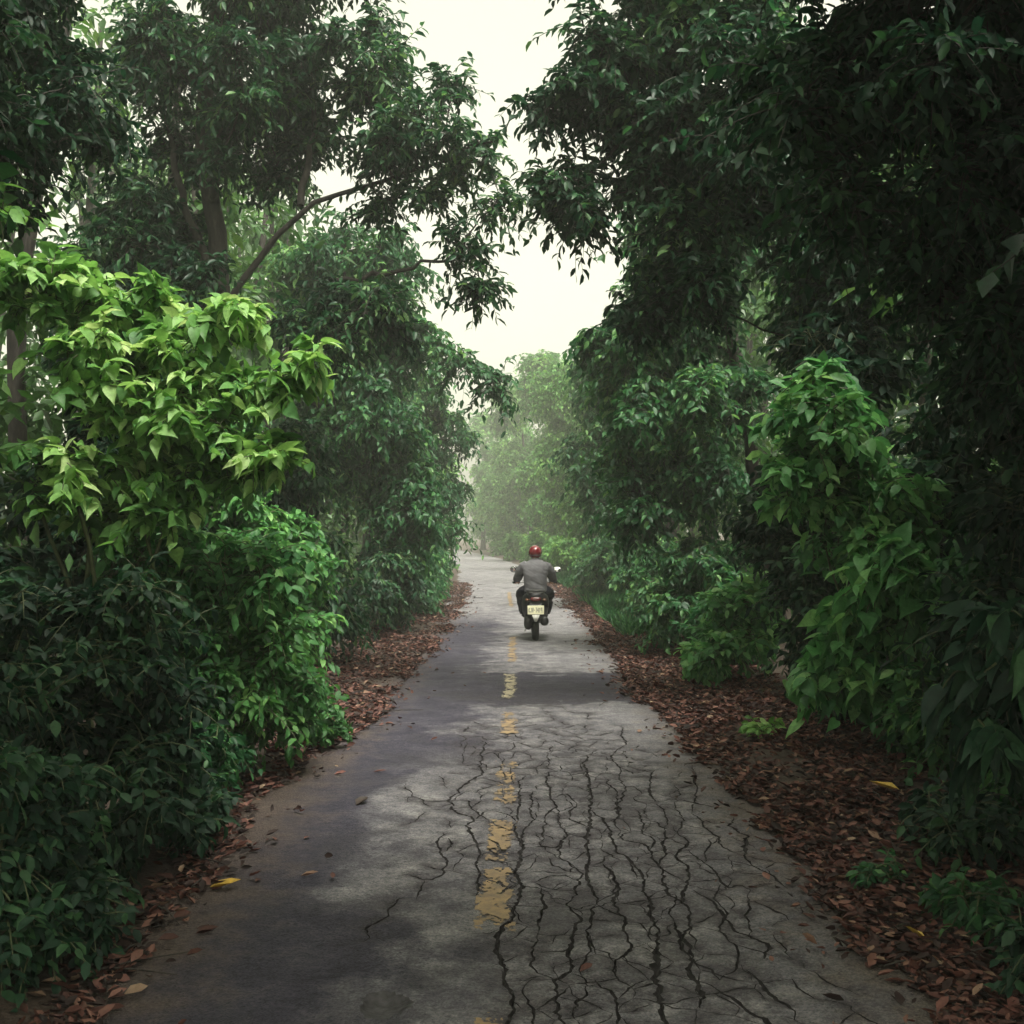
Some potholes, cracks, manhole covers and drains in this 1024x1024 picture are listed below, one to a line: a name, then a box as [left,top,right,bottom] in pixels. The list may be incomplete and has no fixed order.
crack [363,708,878,1024]
